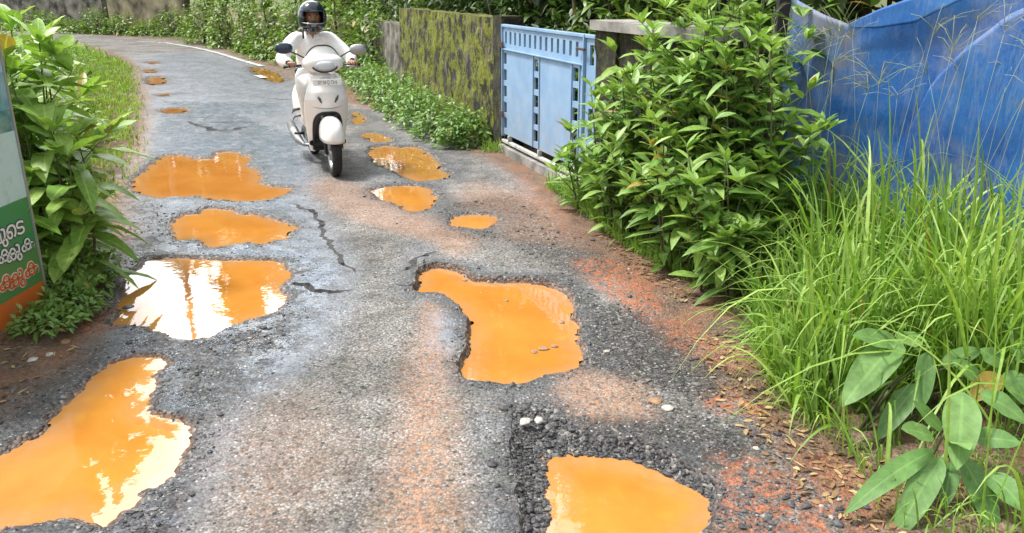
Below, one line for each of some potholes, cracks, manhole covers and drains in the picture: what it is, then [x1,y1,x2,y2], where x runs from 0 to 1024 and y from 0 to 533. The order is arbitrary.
pothole [164,205,303,247]
pothole [362,143,456,181]
pothole [247,66,288,83]
pothole [347,111,373,125]
pothole [141,76,171,85]
crack [289,203,356,294]
pothole [445,211,505,229]
pothole [509,406,719,533]
pothole [125,150,298,202]
pothole [355,131,396,143]
pothole [363,183,445,212]
pothole [104,254,298,341]
